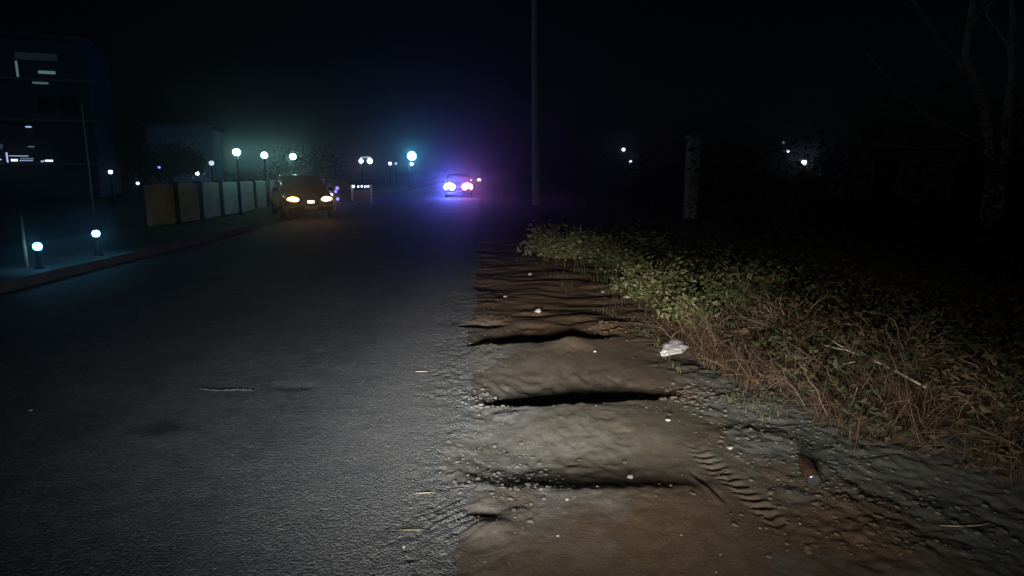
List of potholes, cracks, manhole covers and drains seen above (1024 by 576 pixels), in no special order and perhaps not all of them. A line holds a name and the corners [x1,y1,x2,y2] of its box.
pothole [467,315,622,347]
pothole [439,415,742,494]
pothole [458,320,508,329]
pothole [470,350,685,408]
